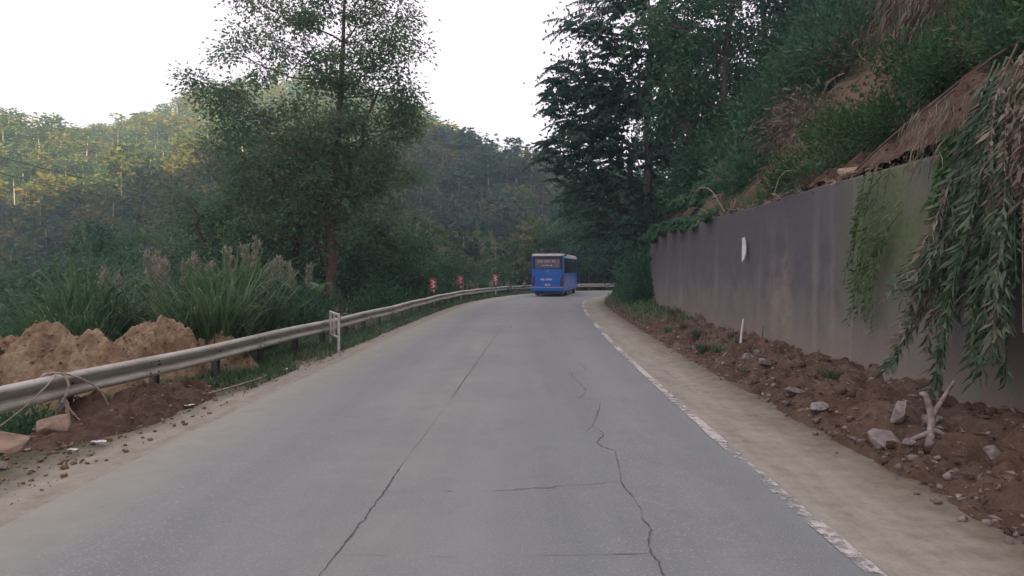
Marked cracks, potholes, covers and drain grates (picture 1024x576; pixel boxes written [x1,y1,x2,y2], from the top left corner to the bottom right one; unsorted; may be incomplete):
crack [337,362,703,576]
